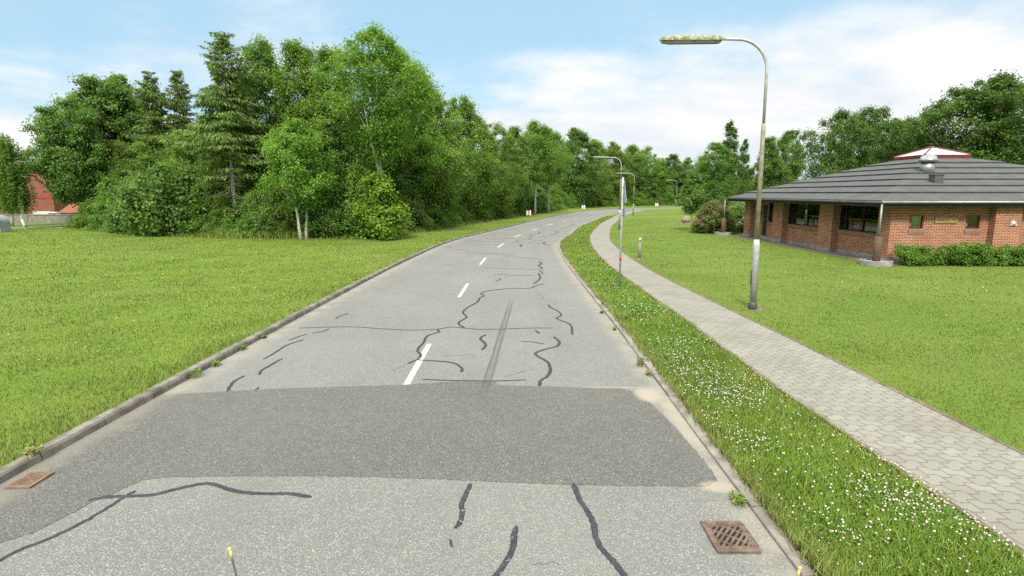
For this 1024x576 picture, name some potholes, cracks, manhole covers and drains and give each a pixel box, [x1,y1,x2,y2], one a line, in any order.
crack [451,238,542,276]
